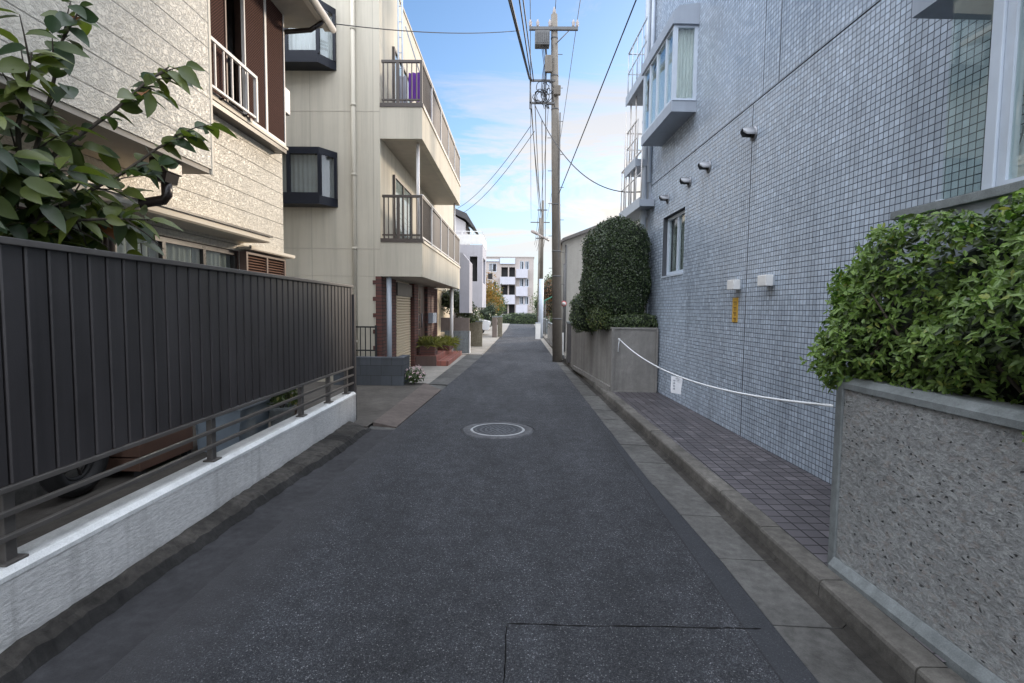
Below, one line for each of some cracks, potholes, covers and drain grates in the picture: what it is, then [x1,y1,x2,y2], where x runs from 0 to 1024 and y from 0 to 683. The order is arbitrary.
manhole cover [461,421,535,439]
